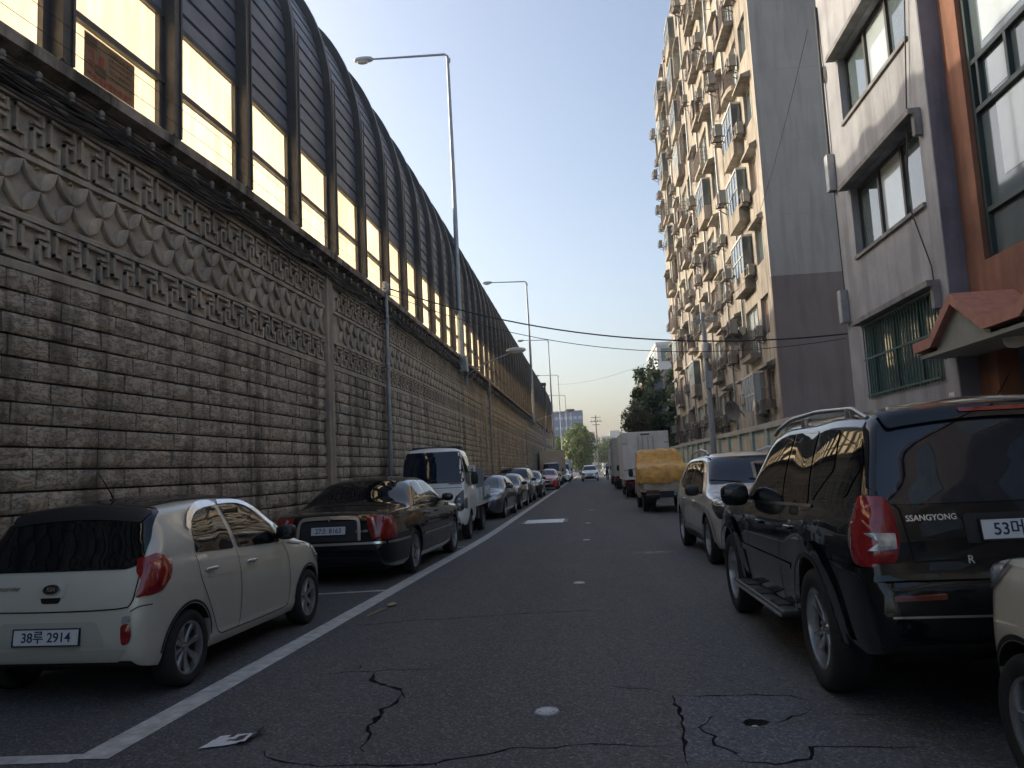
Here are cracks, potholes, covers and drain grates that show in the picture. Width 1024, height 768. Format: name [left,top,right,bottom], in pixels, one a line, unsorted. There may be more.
utility cover [535,707,560,716]
crack [264,665,910,767]
pothole [743,719,770,727]
